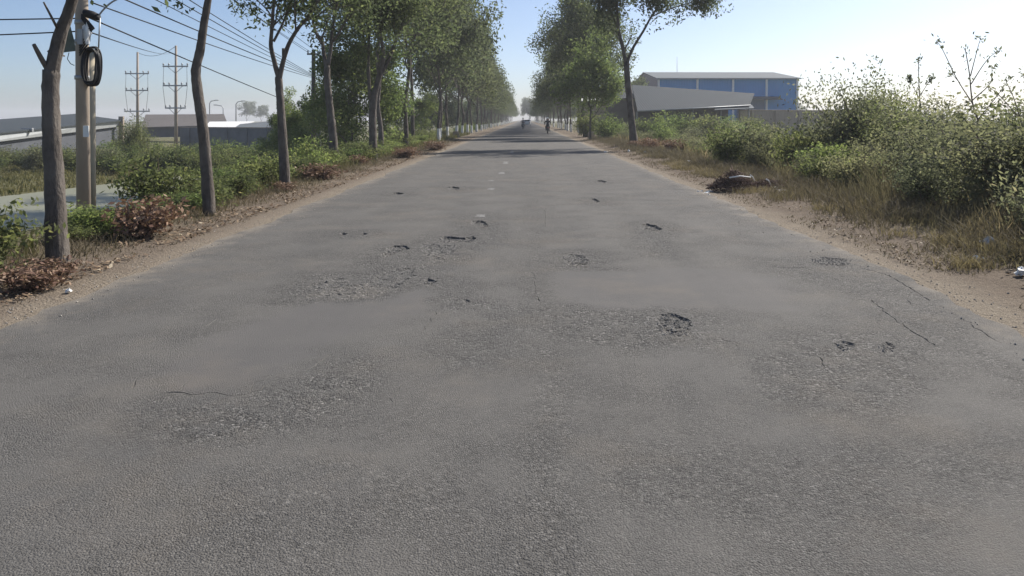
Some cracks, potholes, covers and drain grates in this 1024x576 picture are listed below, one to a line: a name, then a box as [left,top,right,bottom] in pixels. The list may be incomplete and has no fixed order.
crack [866,269,935,346]
pothole [562,254,590,268]
pothole [833,341,858,352]
crack [162,354,330,395]
pothole [640,223,662,233]
pothole [876,342,897,353]
pothole [652,313,693,338]
pothole [380,245,410,258]
